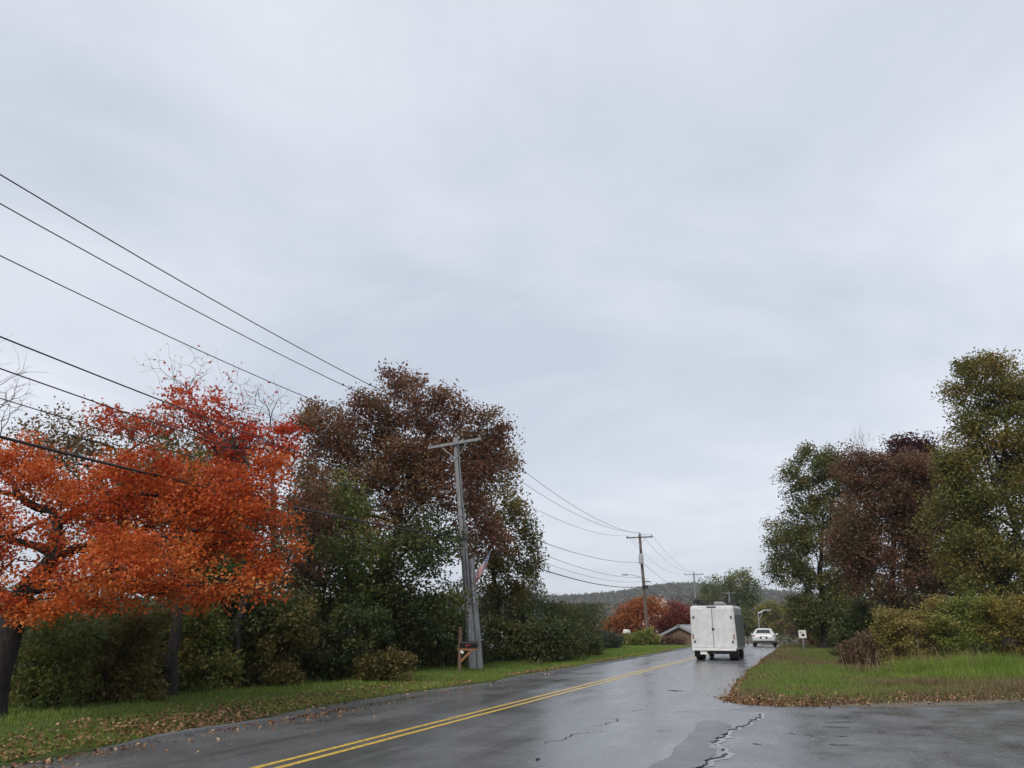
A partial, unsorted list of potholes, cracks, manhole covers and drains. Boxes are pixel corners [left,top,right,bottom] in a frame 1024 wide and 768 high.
crack [697,714,761,768]
